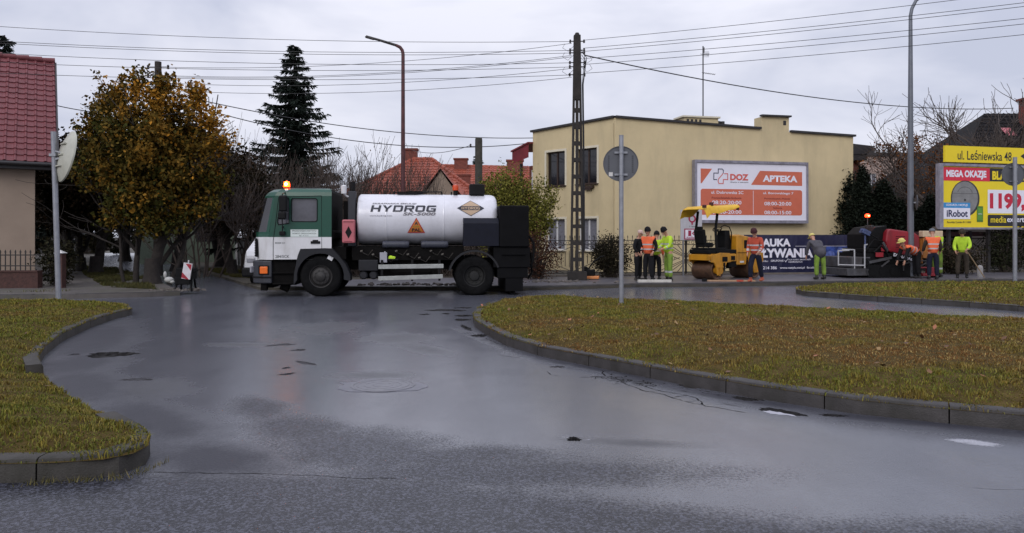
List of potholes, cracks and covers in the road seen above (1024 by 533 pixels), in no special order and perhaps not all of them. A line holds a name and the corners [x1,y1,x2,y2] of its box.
manhole cover [337,378,428,392]
crack [547,368,757,413]
pothole [759,407,808,416]
